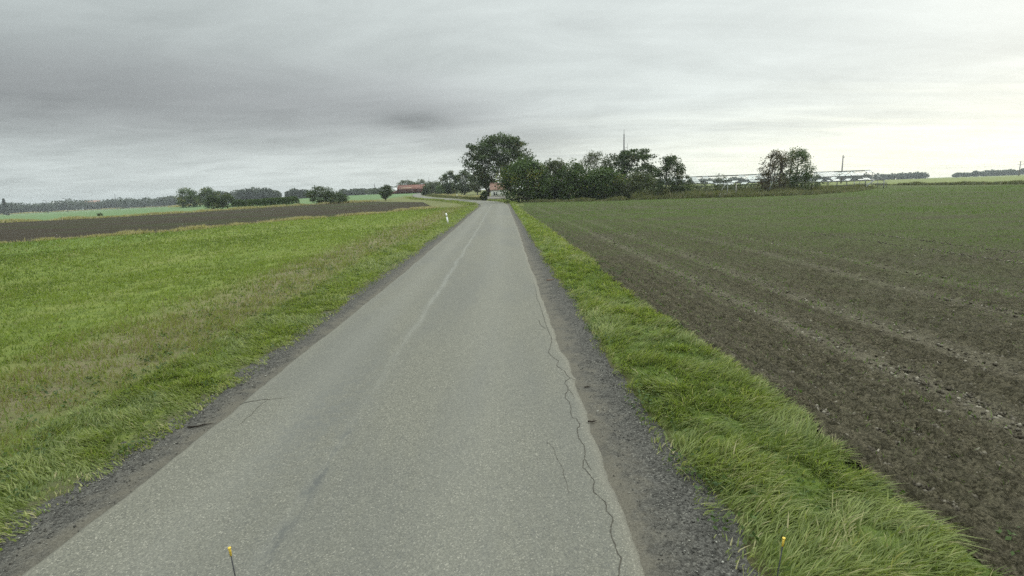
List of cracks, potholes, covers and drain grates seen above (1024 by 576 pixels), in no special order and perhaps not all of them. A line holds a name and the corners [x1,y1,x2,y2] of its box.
crack [534,285,622,576]
